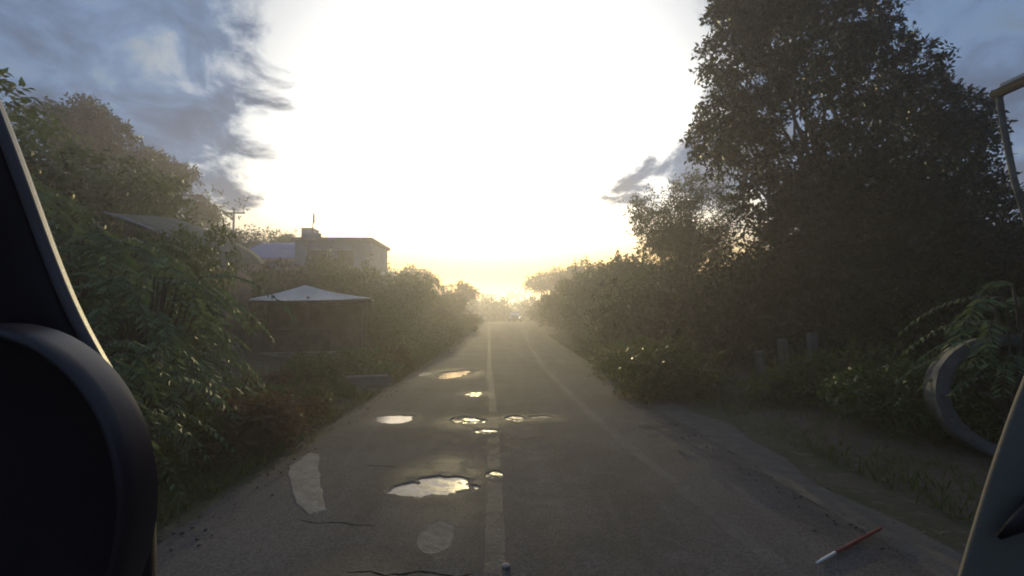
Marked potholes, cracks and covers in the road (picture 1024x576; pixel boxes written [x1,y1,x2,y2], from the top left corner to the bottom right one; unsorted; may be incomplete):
pothole [383,475,482,498]
pothole [434,369,482,379]
pothole [485,470,504,479]
pothole [449,416,488,424]
pothole [372,414,418,424]
